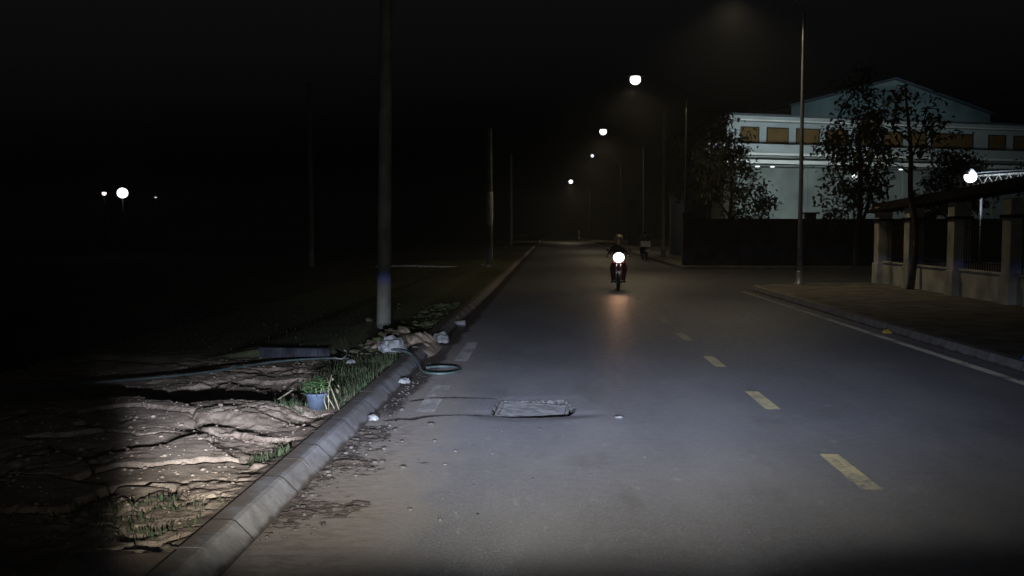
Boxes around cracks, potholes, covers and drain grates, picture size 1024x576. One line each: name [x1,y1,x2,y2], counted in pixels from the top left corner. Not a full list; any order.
manhole cover [491,400,577,418]
